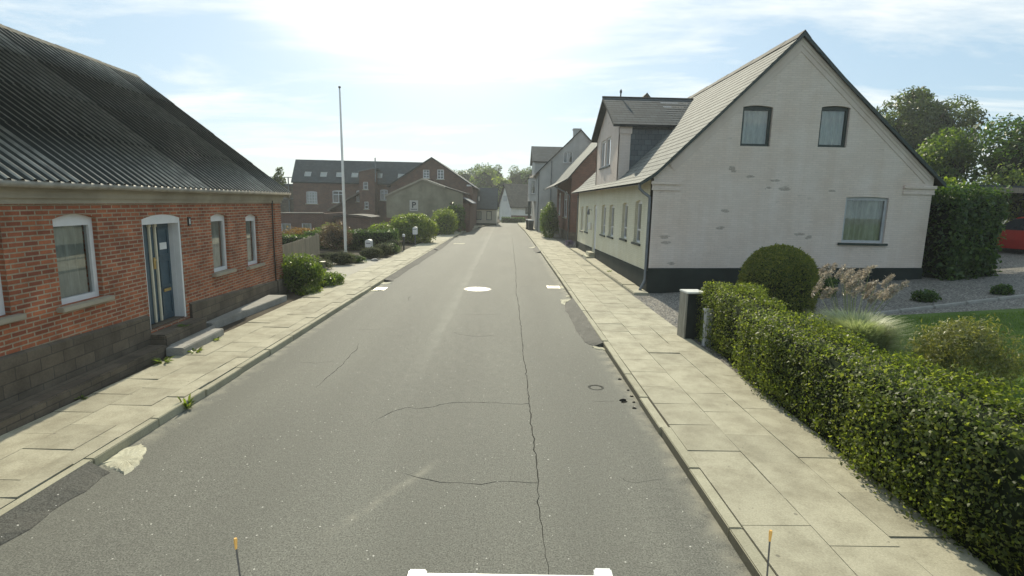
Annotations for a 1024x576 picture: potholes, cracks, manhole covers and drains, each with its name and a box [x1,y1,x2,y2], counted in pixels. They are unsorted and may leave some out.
crack [373,248,549,575]
